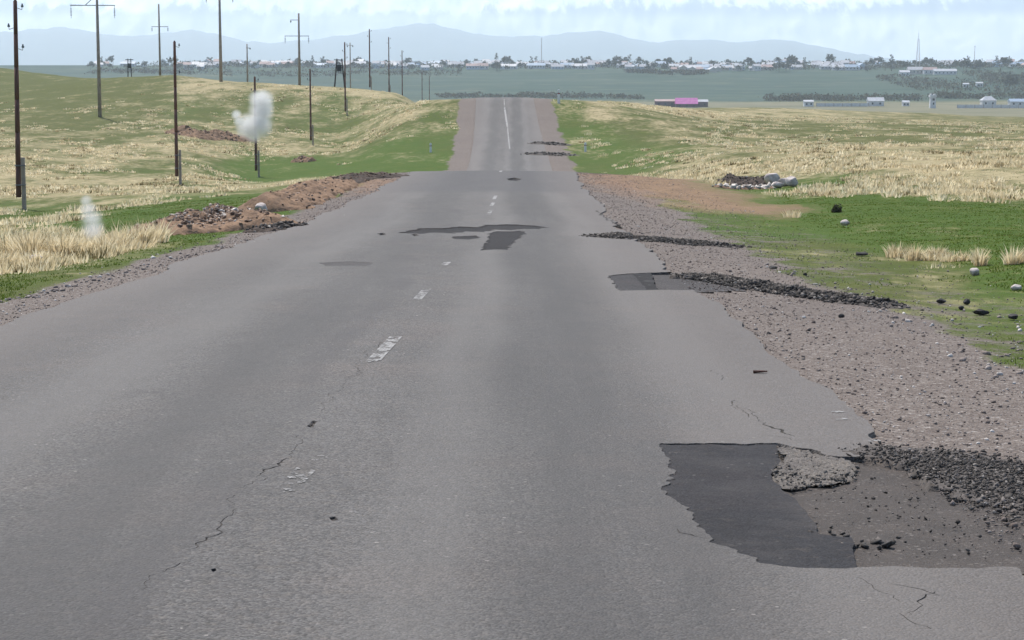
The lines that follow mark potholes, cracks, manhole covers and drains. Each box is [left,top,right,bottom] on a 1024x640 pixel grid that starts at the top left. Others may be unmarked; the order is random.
crack [731,400,798,441]
crack [138,341,383,591]
